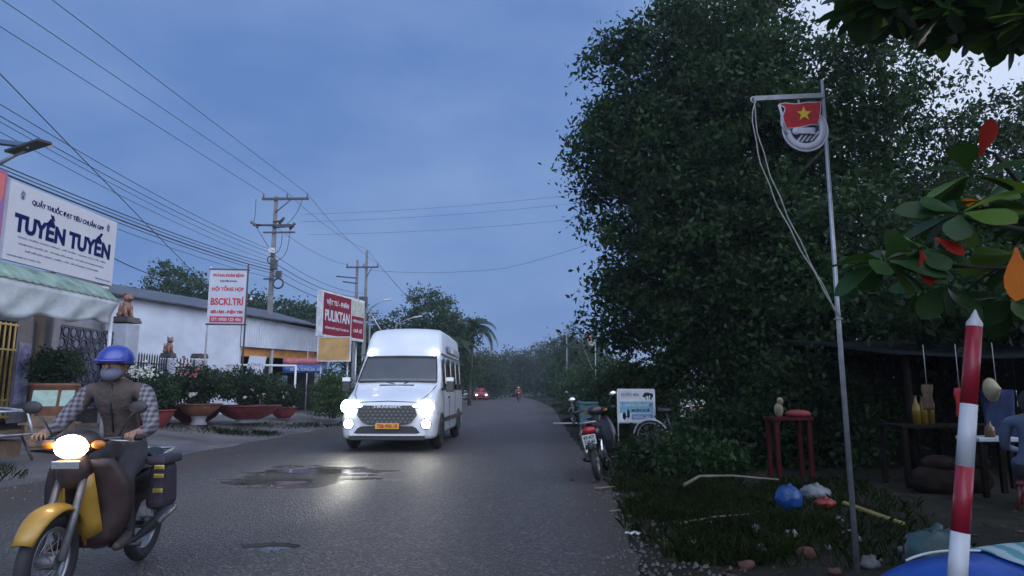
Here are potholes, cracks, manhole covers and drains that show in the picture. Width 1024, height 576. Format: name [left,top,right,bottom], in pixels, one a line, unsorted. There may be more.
pothole [241,541,301,551]
pothole [215,478,315,486]
